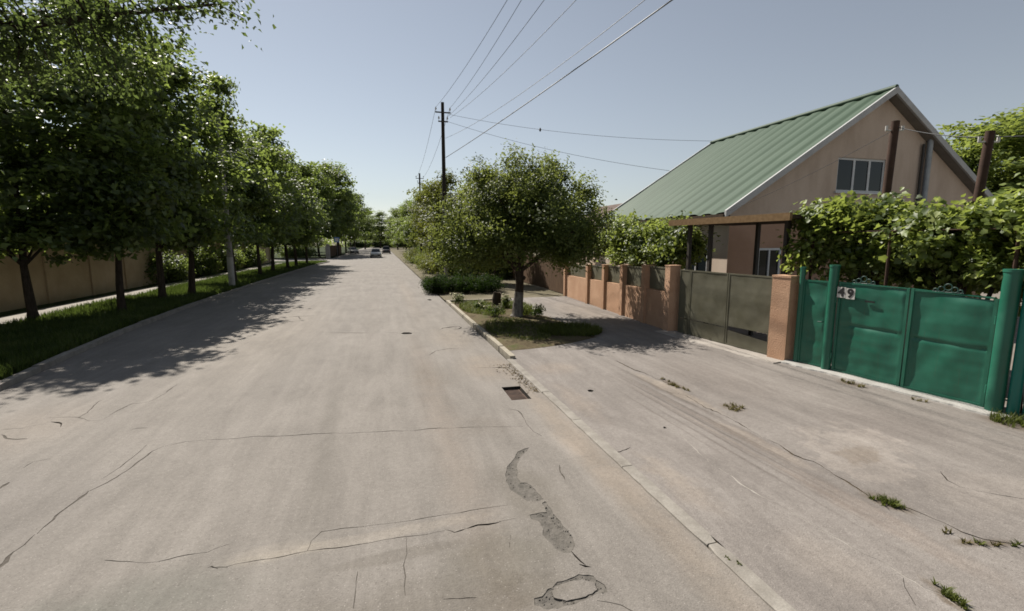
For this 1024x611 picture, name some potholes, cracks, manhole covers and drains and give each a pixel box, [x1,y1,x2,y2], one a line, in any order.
crack [681,435,962,610]
crack [106,505,515,596]
drain grate [502,386,531,400]
crack [0,409,540,568]
crack [2,385,176,440]
pothole [505,448,543,501]
crack [615,360,1024,546]
pothole [534,574,607,609]
pothole [530,502,575,553]
